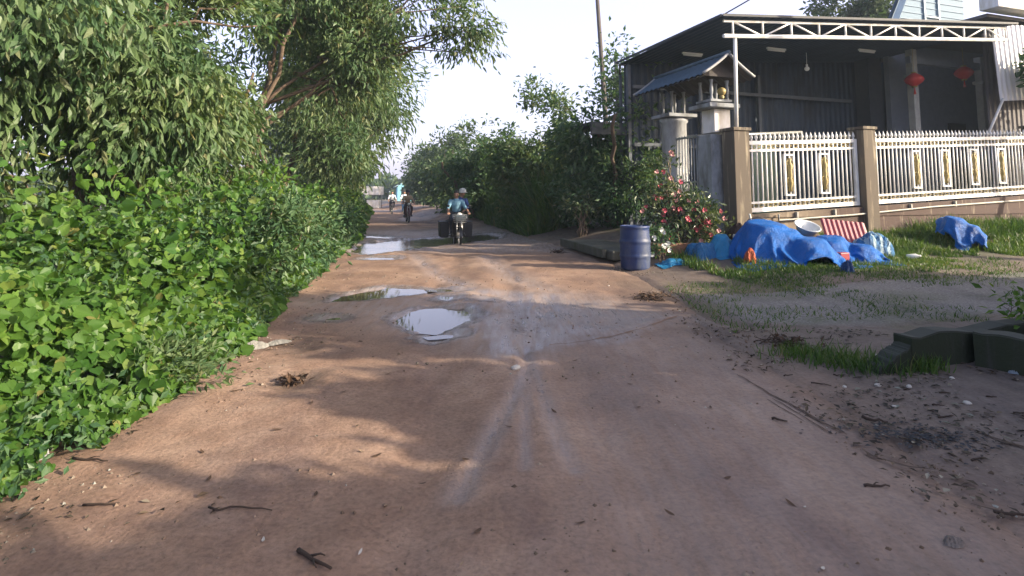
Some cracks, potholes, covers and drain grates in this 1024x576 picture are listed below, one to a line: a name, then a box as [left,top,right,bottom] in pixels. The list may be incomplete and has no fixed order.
pothole [383,303,492,336]
pothole [304,313,353,322]
pothole [346,232,507,255]
pothole [322,286,432,303]
